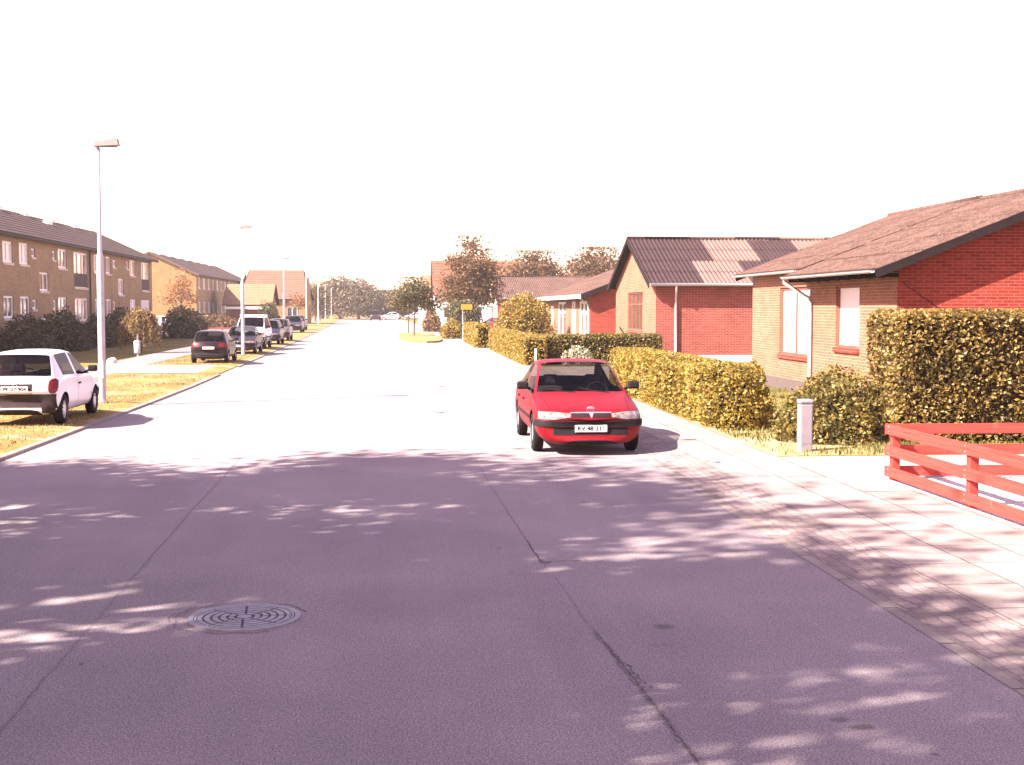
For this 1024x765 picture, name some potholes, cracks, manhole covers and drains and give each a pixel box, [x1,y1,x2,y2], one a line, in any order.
crack [474,458,706,765]
manhole cover [167,604,308,634]
